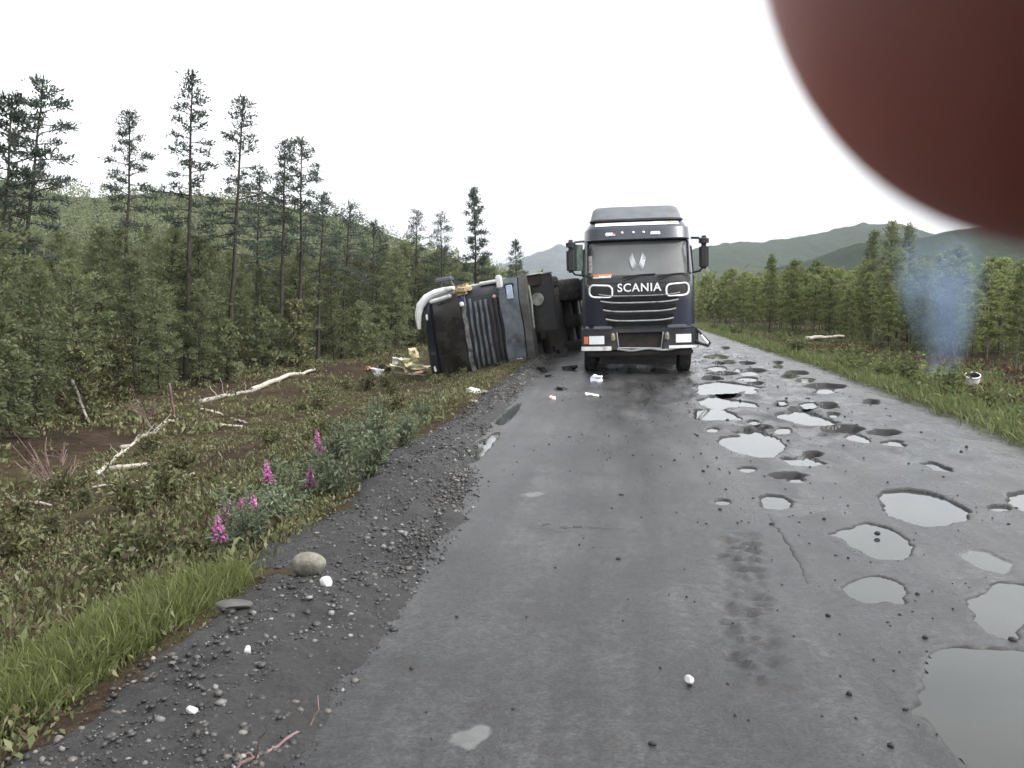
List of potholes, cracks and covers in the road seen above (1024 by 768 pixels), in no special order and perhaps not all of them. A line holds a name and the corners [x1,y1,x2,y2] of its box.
pothole [943,576,1024,651]
pothole [864,485,985,531]
pothole [816,519,930,564]
pothole [745,491,806,513]
pothole [766,408,849,433]
pothole [944,546,1024,578]
pothole [705,392,748,401]
pothole [992,487,1024,514]
pothole [910,459,965,474]
pothole [491,403,528,427]
pothole [689,395,766,411]
pothole [829,571,932,610]
